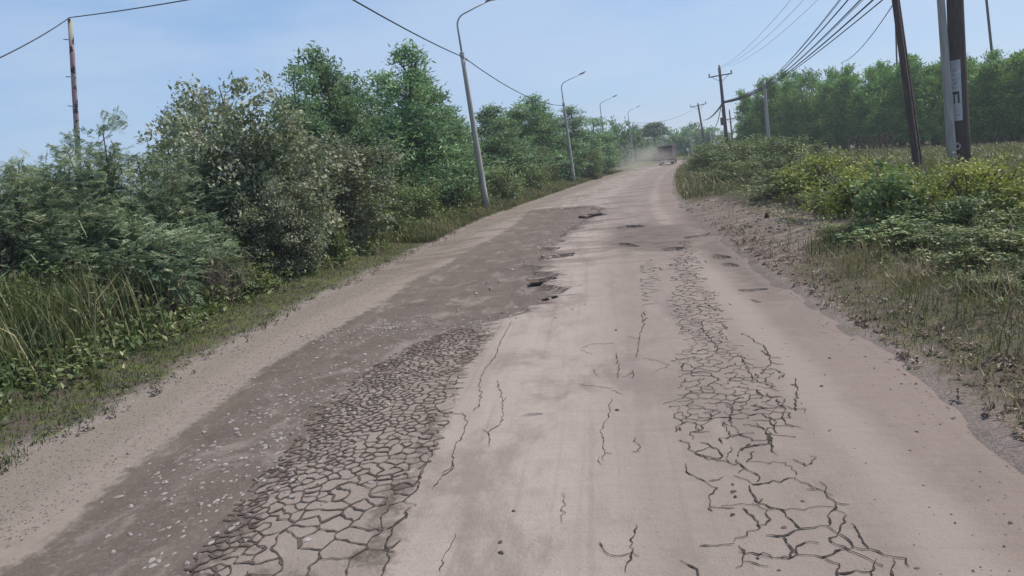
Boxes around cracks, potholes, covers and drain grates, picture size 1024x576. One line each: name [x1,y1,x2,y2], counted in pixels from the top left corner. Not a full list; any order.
crack [184,322,511,576]
crack [663,241,909,576]
crack [560,259,670,521]
crack [599,525,638,572]
